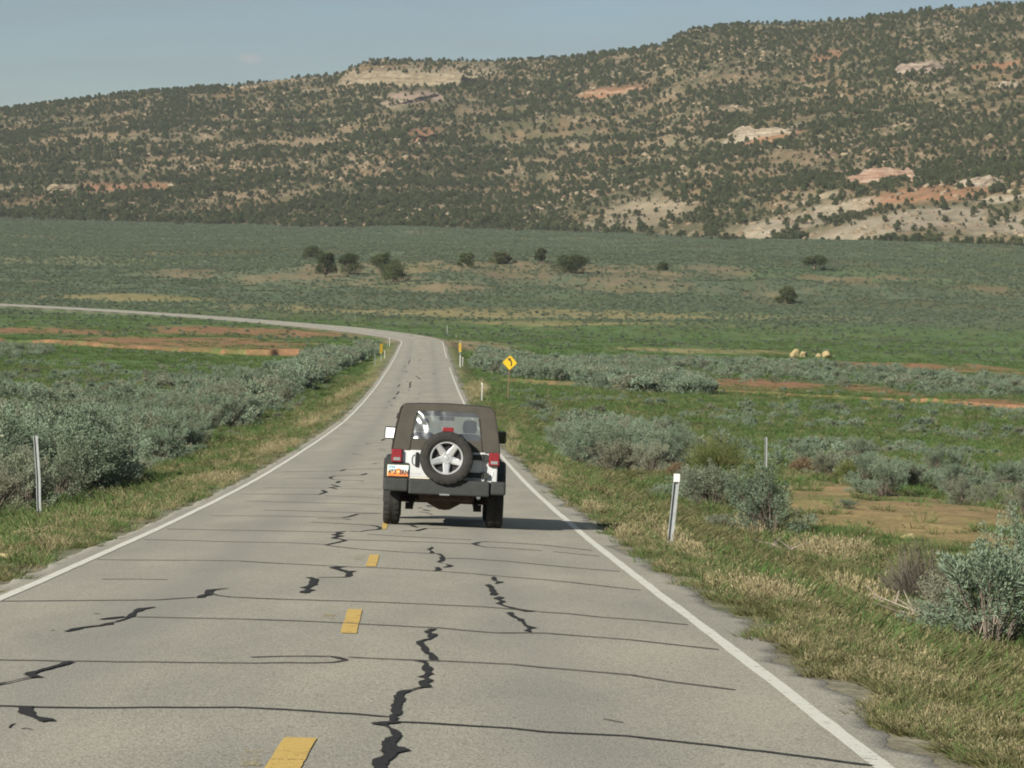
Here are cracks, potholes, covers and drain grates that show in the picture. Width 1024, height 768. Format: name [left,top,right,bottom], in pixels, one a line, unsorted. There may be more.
crack [97,534,639,590]
